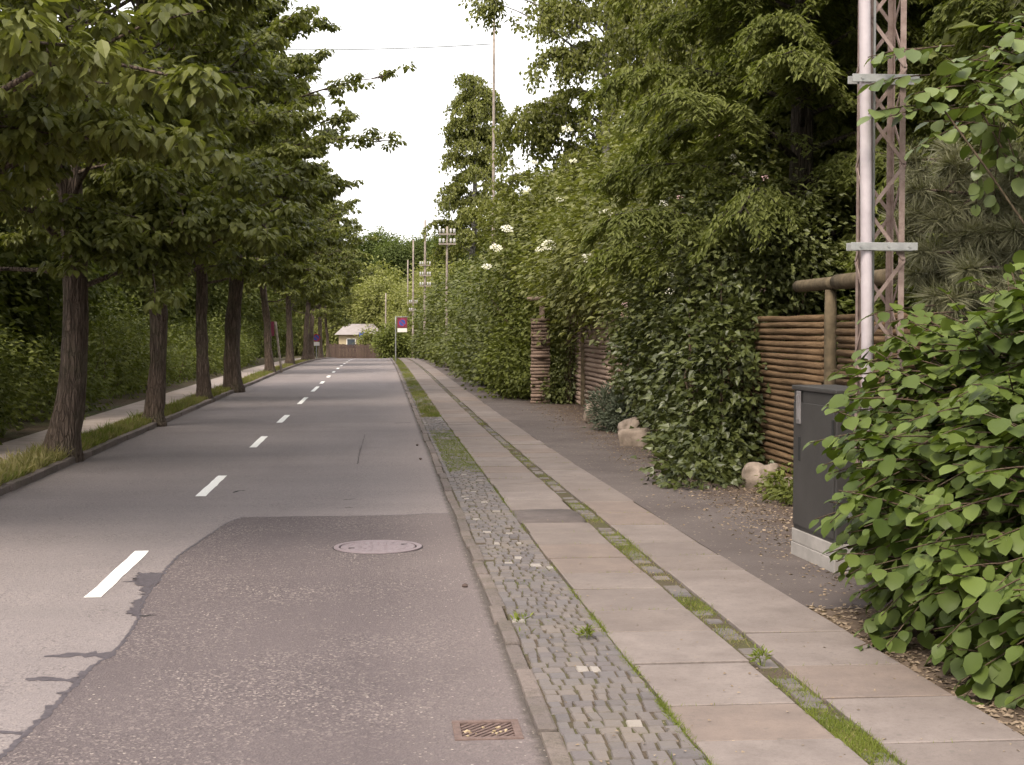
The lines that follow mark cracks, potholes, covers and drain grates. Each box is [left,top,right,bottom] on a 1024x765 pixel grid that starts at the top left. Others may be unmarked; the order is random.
drain grate [452,719,524,741]
manhole cover [333,540,423,554]
